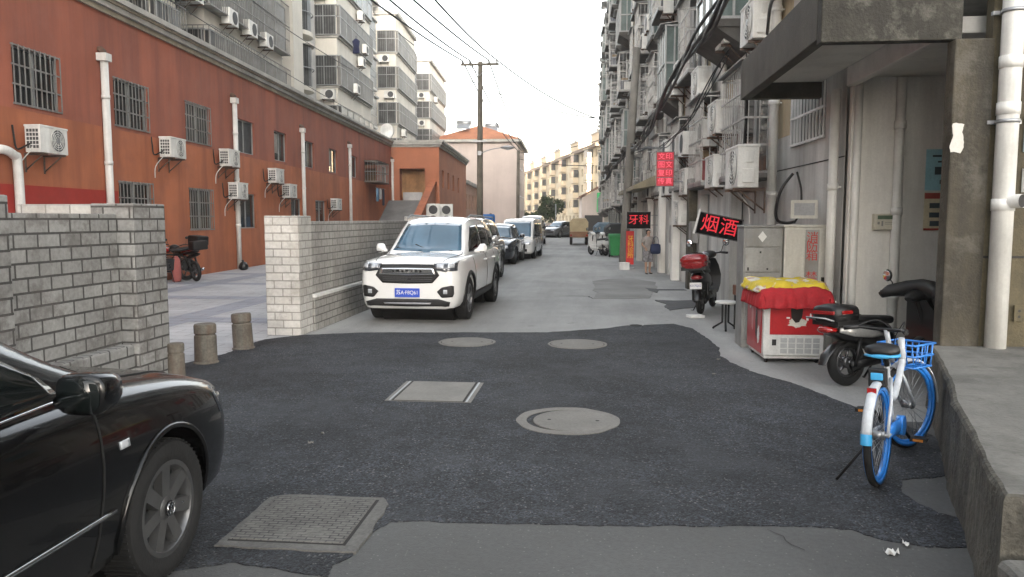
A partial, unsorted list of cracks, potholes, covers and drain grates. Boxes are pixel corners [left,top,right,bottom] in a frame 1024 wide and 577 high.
manhole cover [214,494,389,555]
manhole cover [548,339,607,349]
manhole cover [516,407,620,435]
manhole cover [438,337,496,347]
manhole cover [385,381,483,403]
